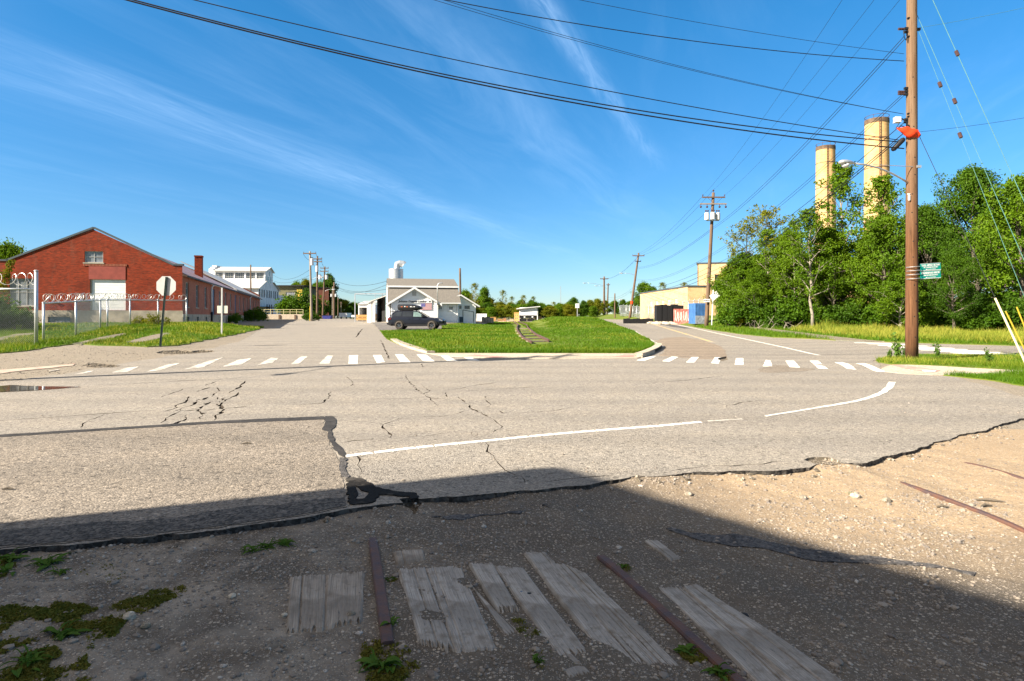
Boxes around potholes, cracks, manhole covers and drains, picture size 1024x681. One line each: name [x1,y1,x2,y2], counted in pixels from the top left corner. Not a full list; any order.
crack [286,364,572,482]
